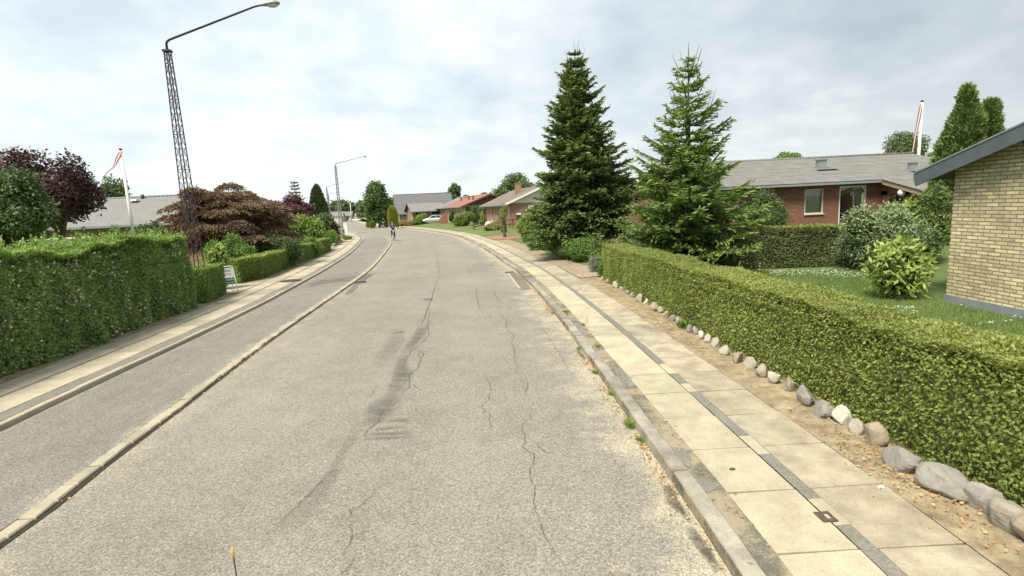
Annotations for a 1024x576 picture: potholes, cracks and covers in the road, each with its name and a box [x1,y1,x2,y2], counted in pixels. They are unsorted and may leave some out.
crack [468,268,568,572]
utility cover [813,511,838,523]
